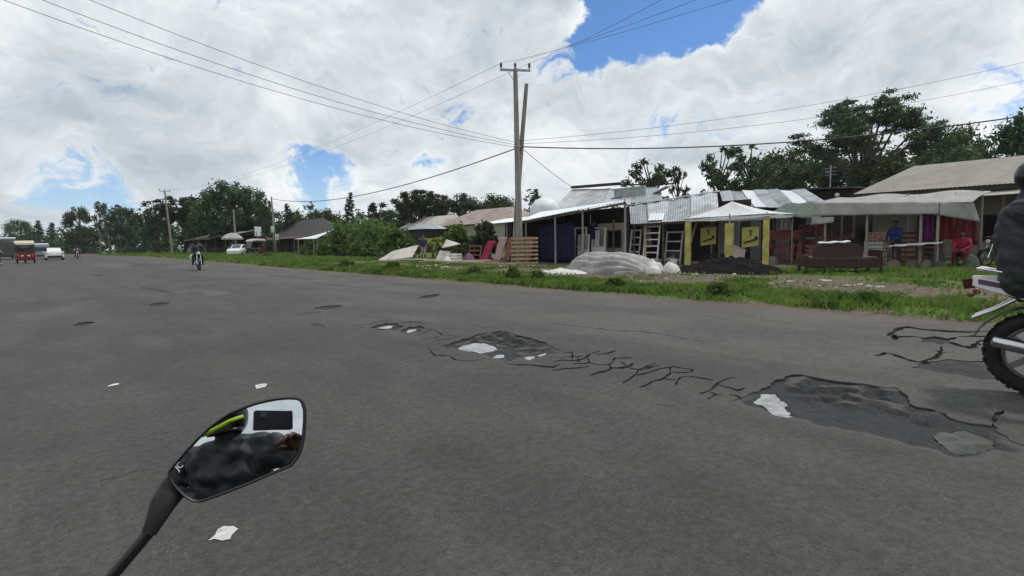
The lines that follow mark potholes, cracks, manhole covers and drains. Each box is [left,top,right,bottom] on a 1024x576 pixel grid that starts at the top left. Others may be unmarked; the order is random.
pothole [443,331,563,363]
crack [509,350,746,407]
pothole [733,374,1024,462]
crack [555,323,726,342]
crack [874,326,988,364]
